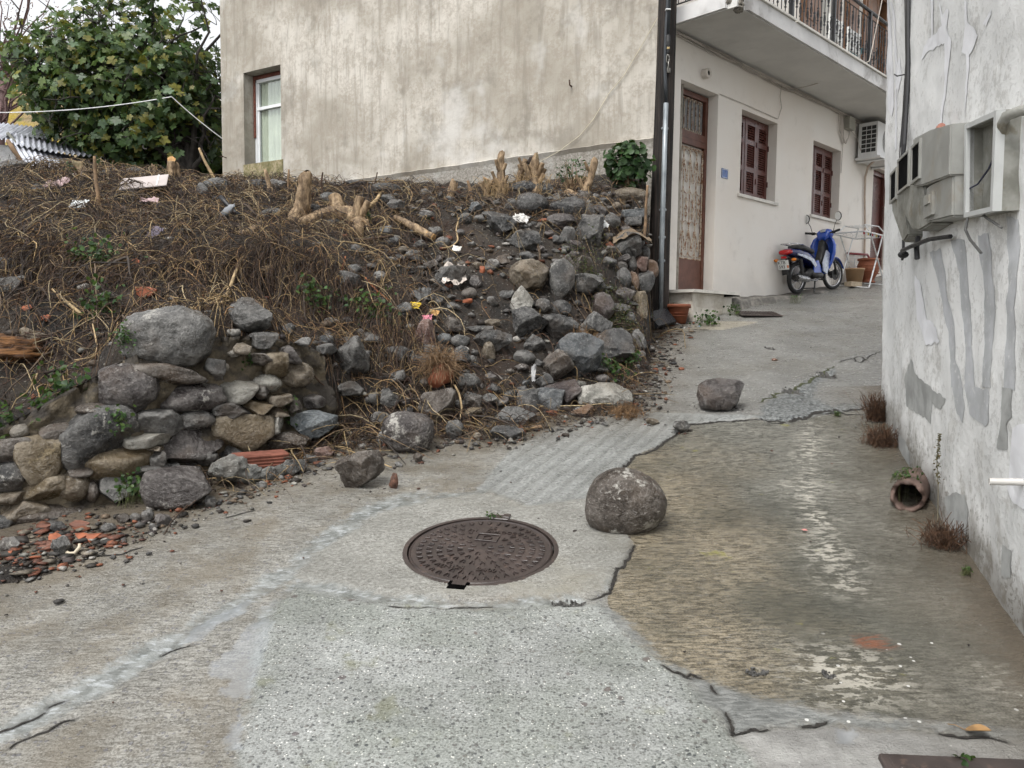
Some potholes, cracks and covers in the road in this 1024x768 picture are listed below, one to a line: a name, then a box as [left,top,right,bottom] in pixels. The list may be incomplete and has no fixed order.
crack [725,712,768,736]
manhole cover [878,753,1024,768]
manhole cover [402,514,559,590]
crack [623,351,880,468]
crack [663,665,717,694]
crack [592,545,635,600]
